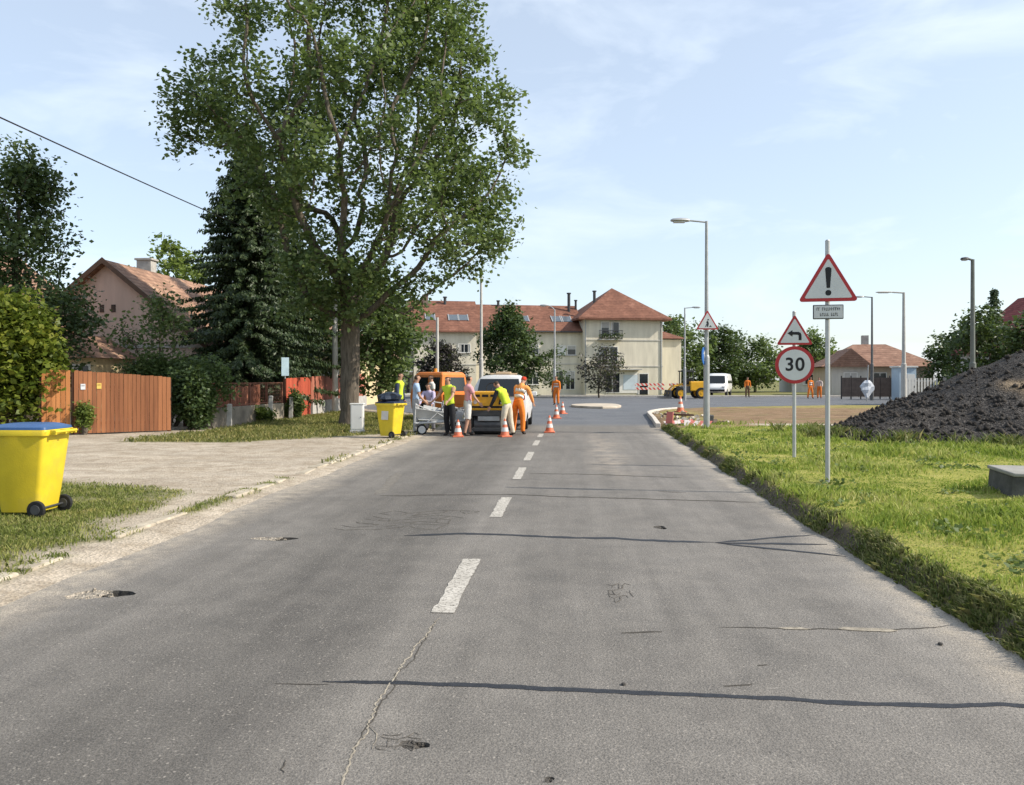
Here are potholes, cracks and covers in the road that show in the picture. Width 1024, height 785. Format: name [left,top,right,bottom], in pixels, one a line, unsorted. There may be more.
pothole [399,740,430,749]
crack [340,618,439,785]
pothole [65,588,136,599]
